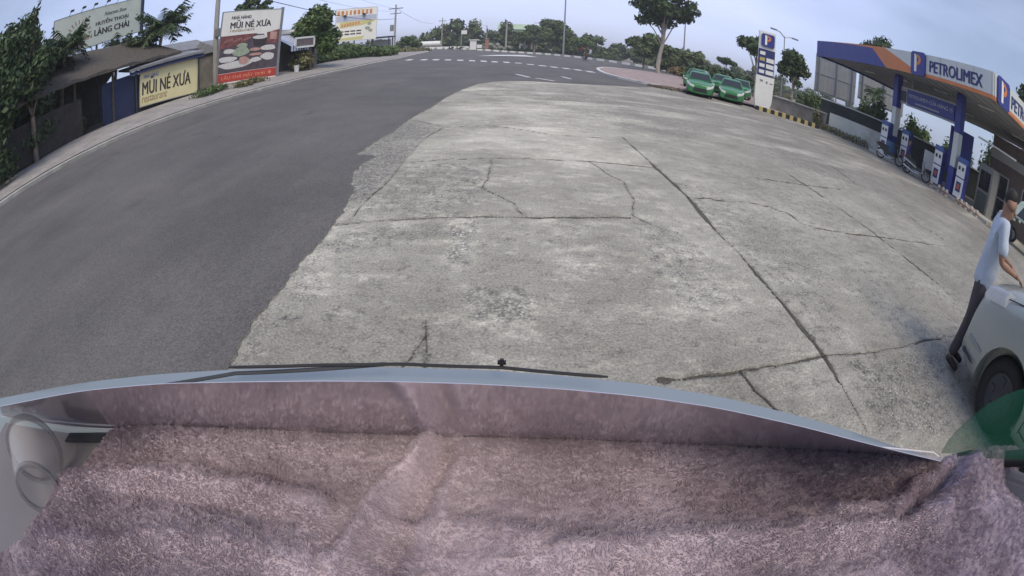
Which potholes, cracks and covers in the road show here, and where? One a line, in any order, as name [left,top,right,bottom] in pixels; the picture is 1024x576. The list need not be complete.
crack [336,120,670,231]
crack [687,197,940,246]
crack [674,336,949,411]
crack [401,321,427,368]
